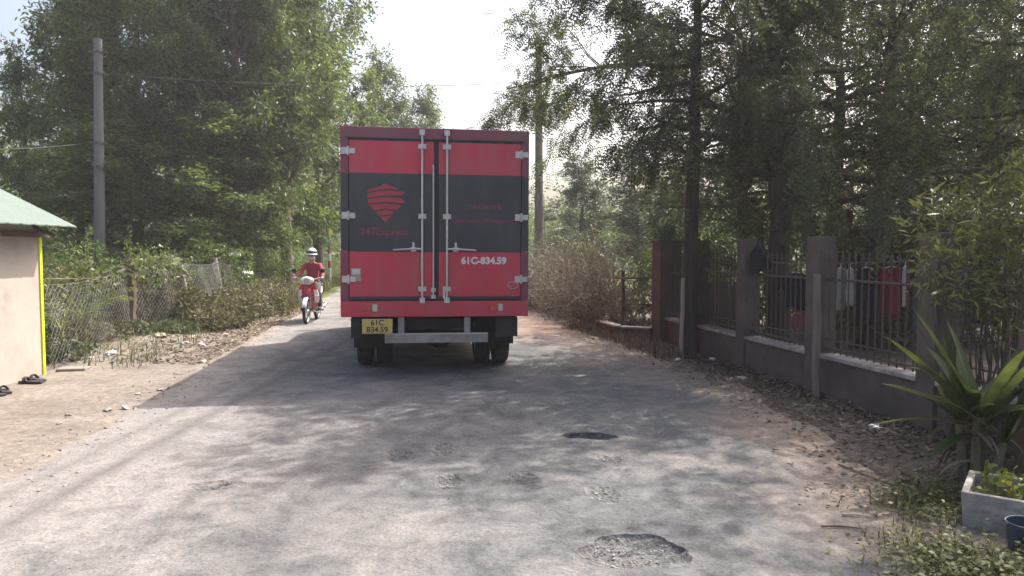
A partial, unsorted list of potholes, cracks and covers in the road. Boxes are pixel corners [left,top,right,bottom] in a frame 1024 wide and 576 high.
pothole [590,455,629,463]
pothole [430,441,458,456]
pothole [560,432,619,440]
pothole [434,473,465,489]
pothole [507,471,542,485]
pothole [584,486,623,504]
pothole [383,449,416,463]
pothole [573,534,693,569]
pothole [187,480,249,491]
